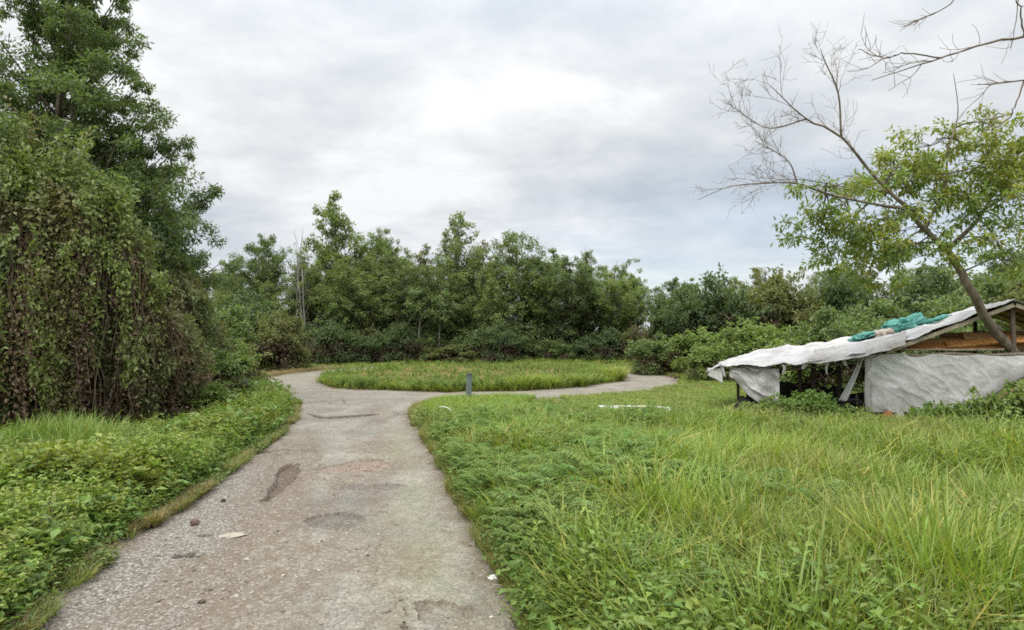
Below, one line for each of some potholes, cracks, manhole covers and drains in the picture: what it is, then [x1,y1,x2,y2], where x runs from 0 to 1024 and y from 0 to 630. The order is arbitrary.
pothole [250,462,308,505]
pothole [294,510,374,533]
crack [299,398,408,419]
